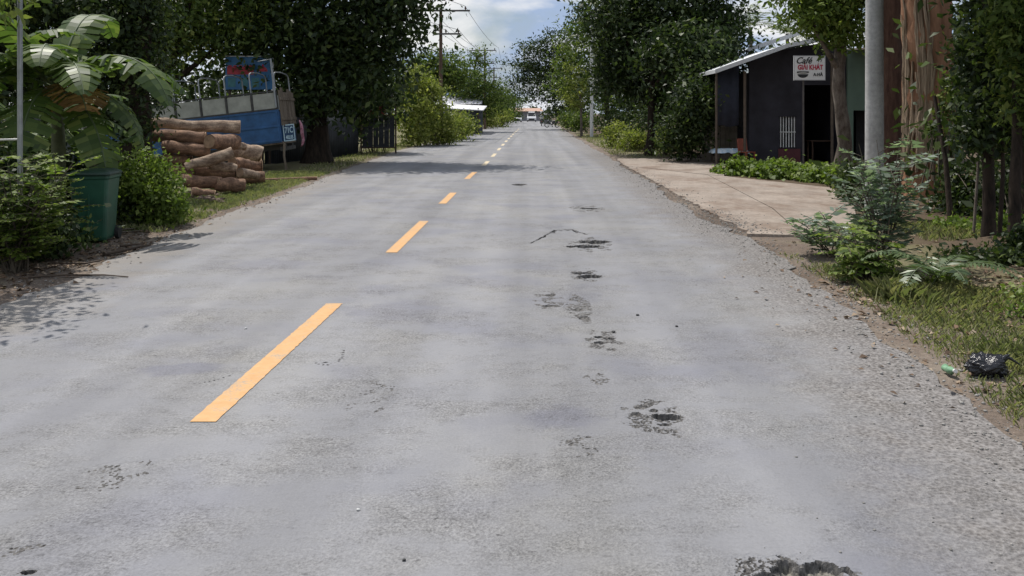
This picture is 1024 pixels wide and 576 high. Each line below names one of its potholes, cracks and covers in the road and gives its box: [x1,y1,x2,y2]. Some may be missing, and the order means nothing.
pothole [723,552,868,576]
crack [523,228,593,244]
pothole [580,328,628,352]
pothole [561,236,614,254]
pothole [614,394,694,439]
pothole [564,268,608,282]
